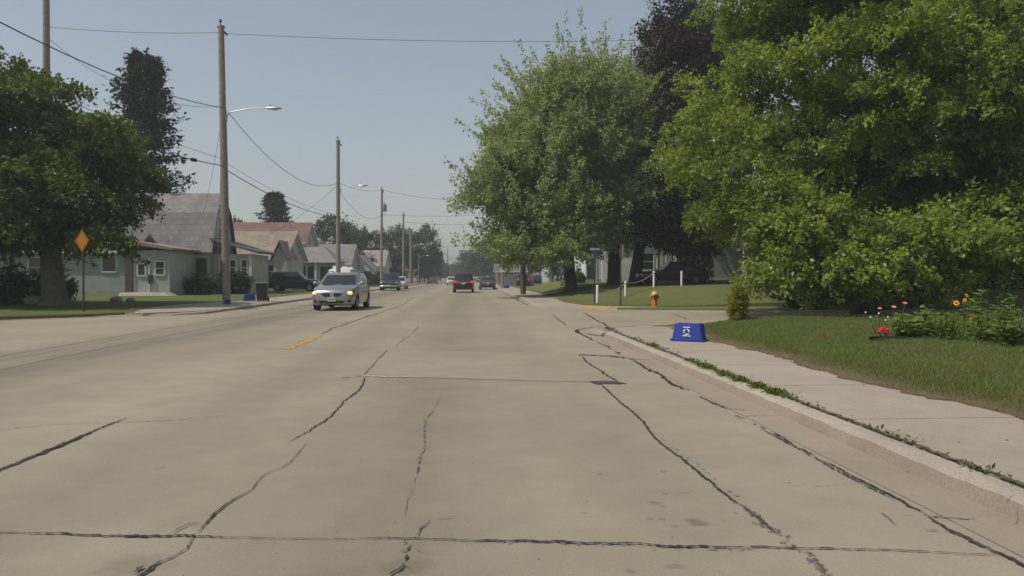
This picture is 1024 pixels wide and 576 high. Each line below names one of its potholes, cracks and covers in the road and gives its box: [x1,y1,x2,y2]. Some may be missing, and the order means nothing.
crack [9,313,1024,576]
